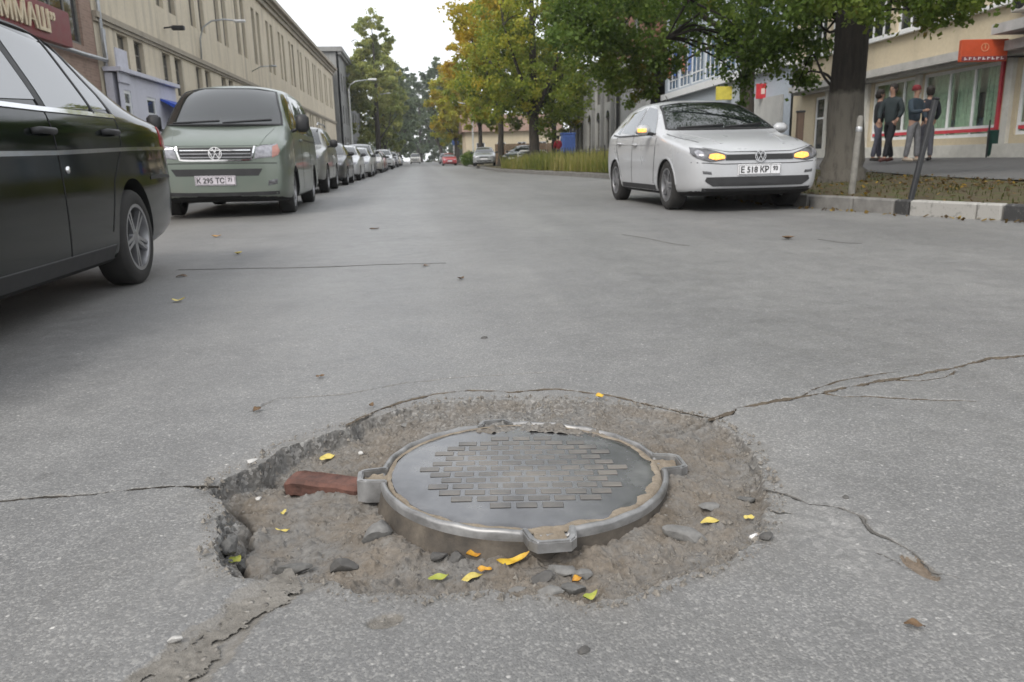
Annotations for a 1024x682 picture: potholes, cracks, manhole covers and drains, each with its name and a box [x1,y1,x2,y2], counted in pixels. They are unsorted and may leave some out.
crack [761,487,940,575]
crack [252,355,1024,426]
crack [0,485,219,502]
crack [125,568,302,682]
manhole cover [357,419,688,560]
pothole [208,399,772,604]
